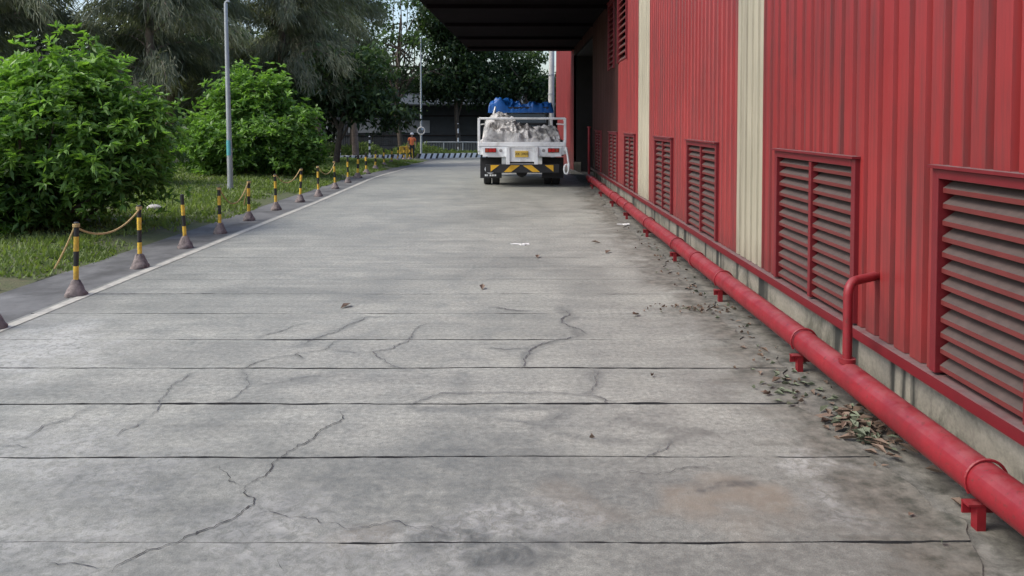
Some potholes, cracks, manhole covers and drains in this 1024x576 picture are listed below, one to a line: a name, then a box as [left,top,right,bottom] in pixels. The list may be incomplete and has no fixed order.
crack [492,311,585,366]
crack [222,316,421,402]
crack [51,412,438,573]
